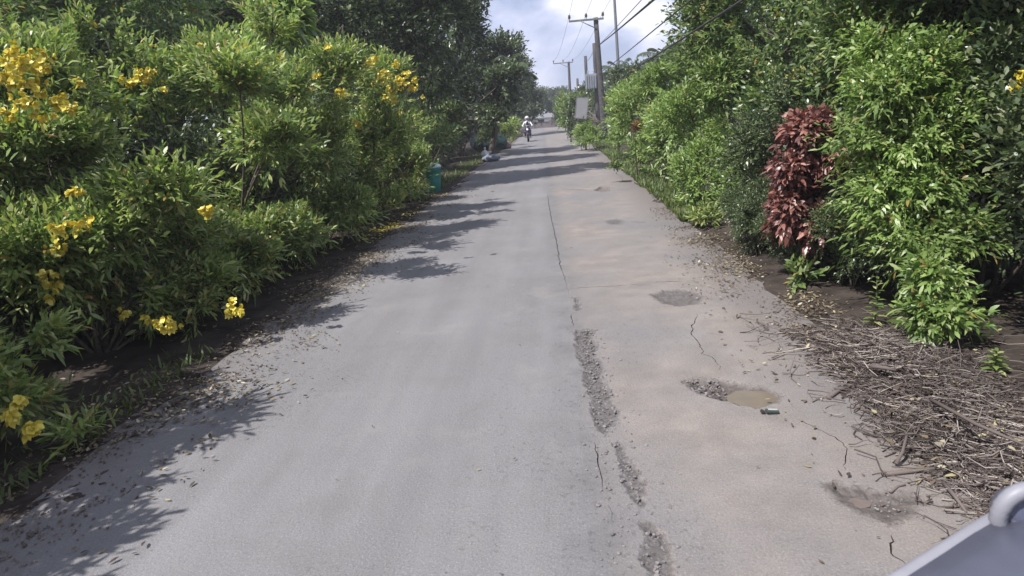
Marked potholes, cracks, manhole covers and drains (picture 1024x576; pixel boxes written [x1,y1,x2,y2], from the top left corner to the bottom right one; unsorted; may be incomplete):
crack [889,535,906,564]
pothole [680,376,787,410]
pothole [817,478,931,530]
